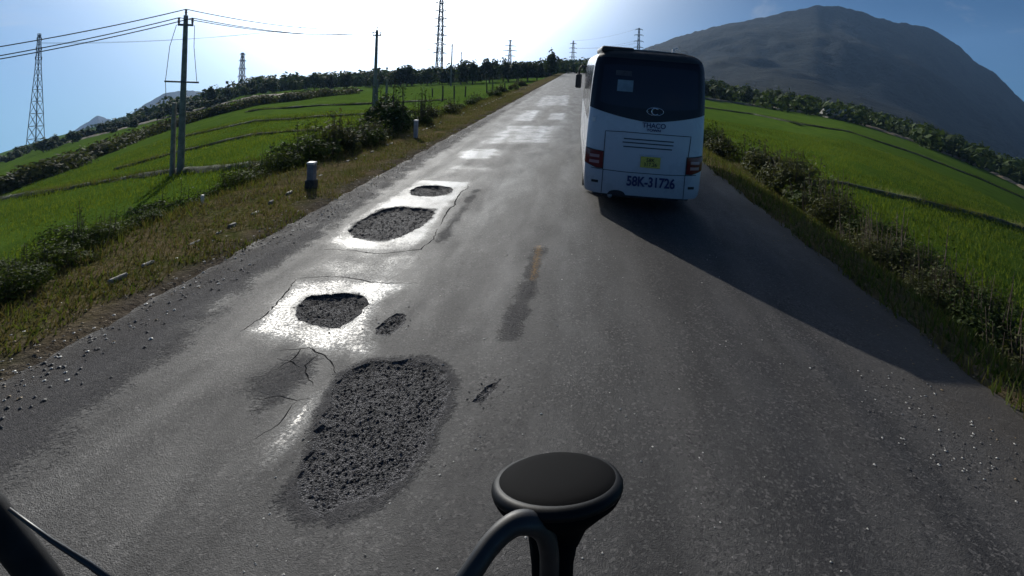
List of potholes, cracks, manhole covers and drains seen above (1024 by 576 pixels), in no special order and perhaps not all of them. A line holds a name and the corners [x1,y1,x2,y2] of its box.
pothole [295,293,369,328]
pothole [375,313,407,336]
pothole [296,359,452,517]
pothole [472,382,498,403]
pothole [409,185,454,197]
pothole [348,207,435,241]
crack [255,347,335,439]
